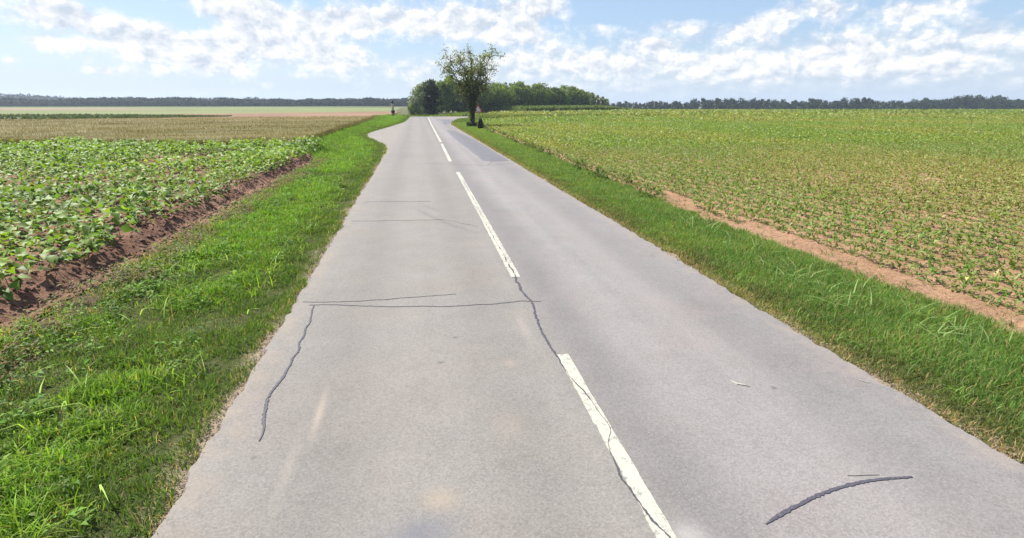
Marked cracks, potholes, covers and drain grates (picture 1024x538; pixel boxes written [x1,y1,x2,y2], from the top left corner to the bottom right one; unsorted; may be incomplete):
crack [259,161,671,538]
crack [765,474,913,525]
